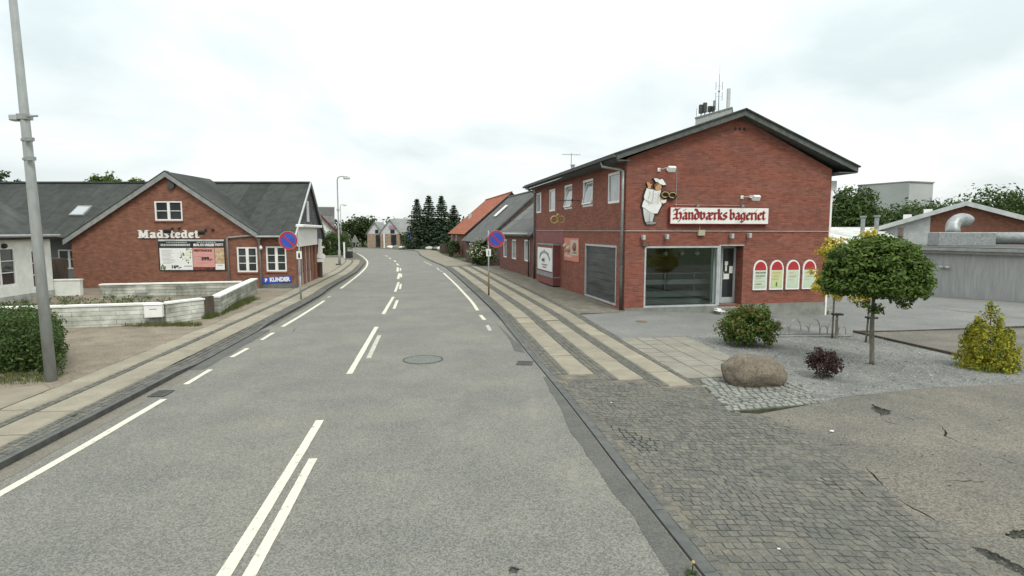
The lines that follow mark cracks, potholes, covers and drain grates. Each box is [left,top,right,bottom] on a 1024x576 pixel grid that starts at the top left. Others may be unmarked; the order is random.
pothole [1005,529,1024,539]
crack [868,470,946,526]
pothole [871,404,890,416]
manhole cover [403,355,443,364]
